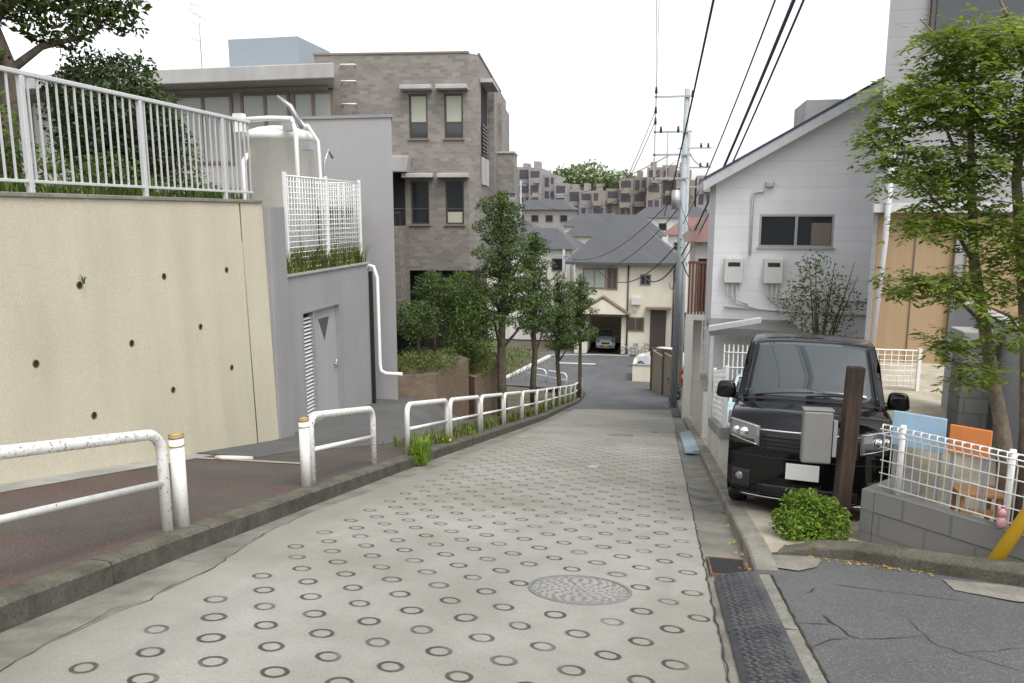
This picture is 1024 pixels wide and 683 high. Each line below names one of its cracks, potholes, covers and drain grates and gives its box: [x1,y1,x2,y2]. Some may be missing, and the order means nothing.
manhole cover [528,575,632,605]
crack [772,575,1015,683]
drain grate [706,556,749,577]
